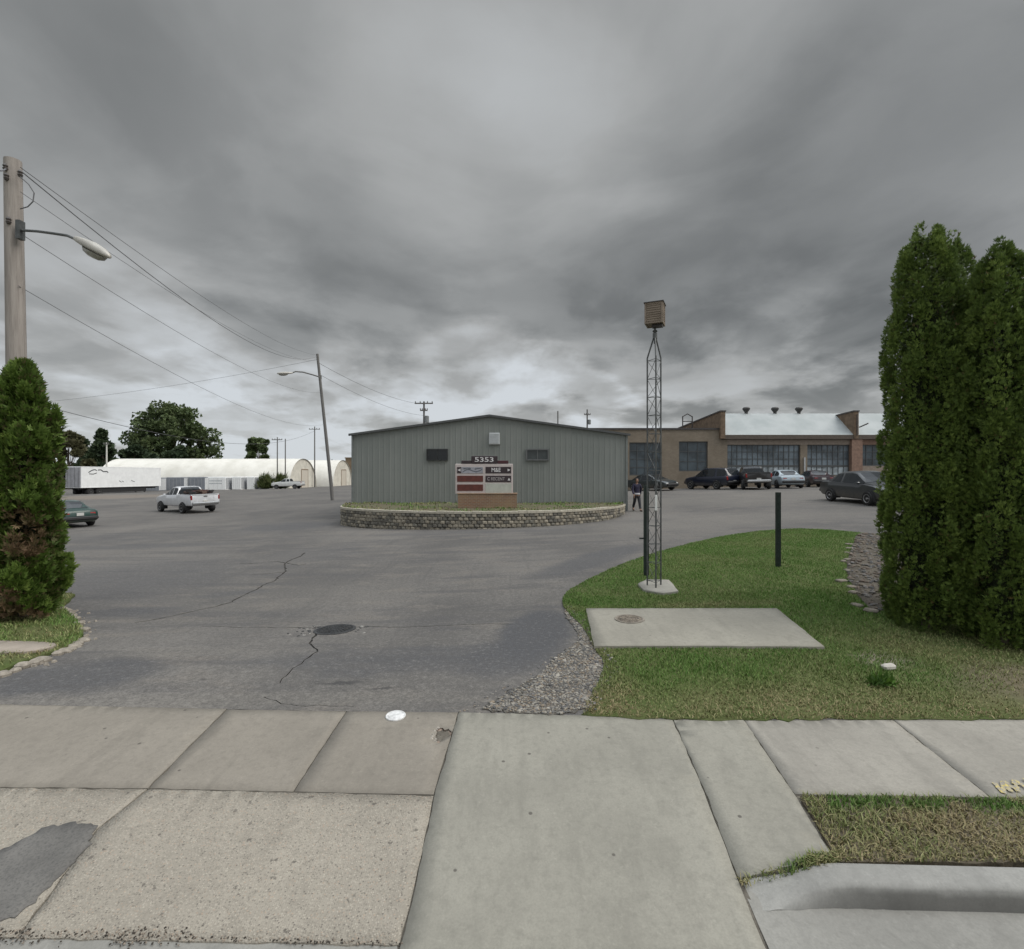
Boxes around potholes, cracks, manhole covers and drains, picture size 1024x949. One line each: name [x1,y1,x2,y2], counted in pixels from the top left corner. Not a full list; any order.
manhole cover [614,614,644,624]
crack [217,626,318,683]
manhole cover [313,624,356,635]
crack [135,553,305,623]
